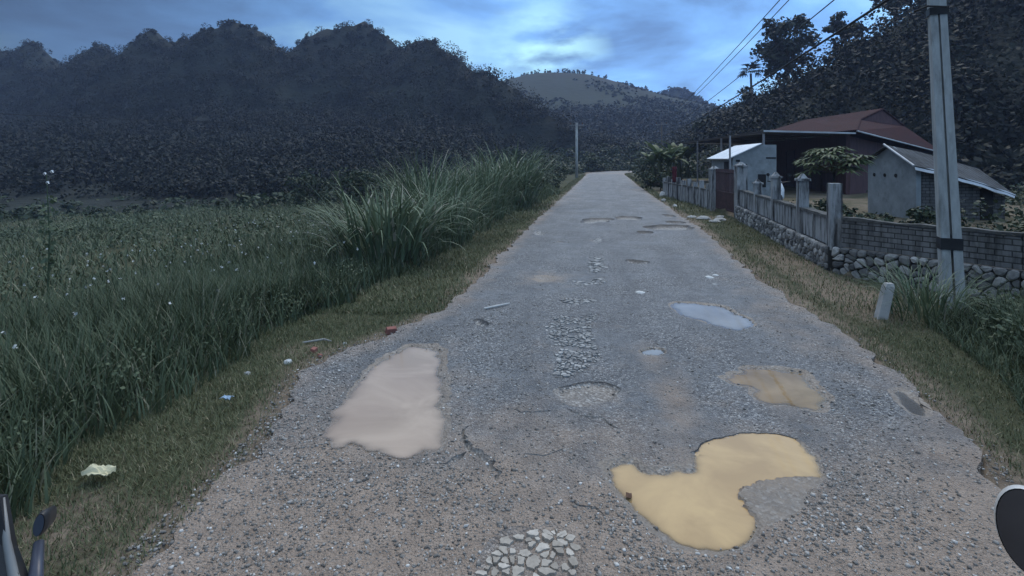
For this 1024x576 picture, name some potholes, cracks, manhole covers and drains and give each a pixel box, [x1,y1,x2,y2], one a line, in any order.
pothole [887,387,933,417]
pothole [638,347,667,355]
pothole [597,432,826,556]
pothole [322,343,453,460]
pothole [668,301,757,331]
crack [441,408,619,481]
pothole [717,365,835,413]
